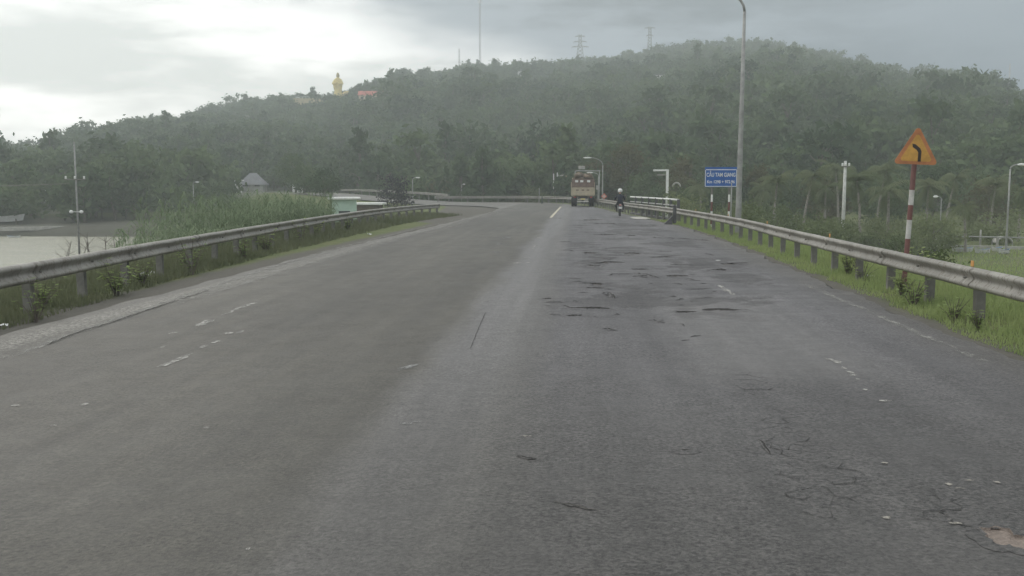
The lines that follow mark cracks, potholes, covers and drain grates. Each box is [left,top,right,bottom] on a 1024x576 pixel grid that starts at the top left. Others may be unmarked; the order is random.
crack [911,482,982,530]
crack [554,501,597,510]
pothole [963,520,1024,555]
crack [758,417,874,518]
